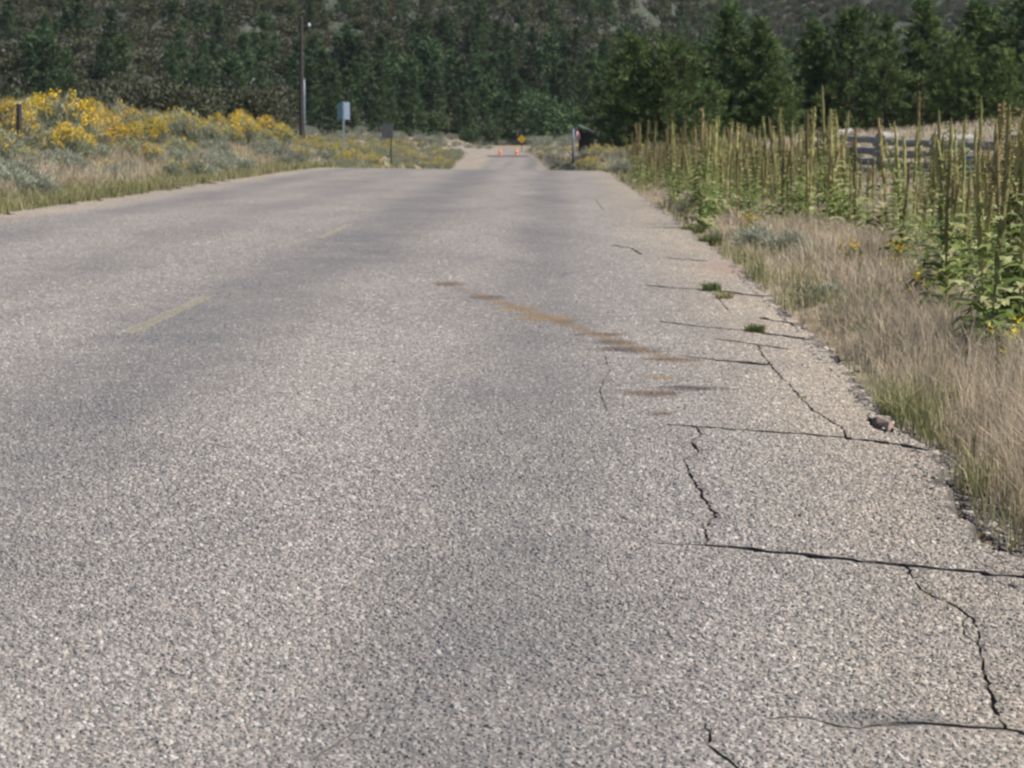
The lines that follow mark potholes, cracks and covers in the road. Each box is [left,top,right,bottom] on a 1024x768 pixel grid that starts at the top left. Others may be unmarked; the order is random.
crack [642,285,1024,735]
crack [703,724,739,768]
